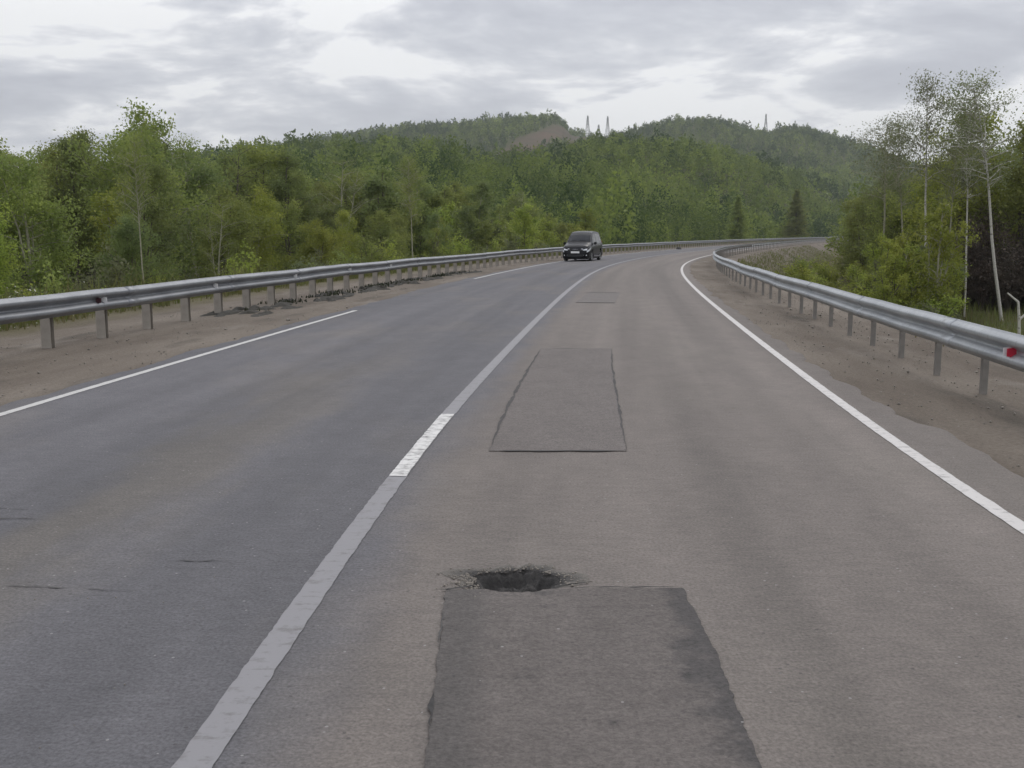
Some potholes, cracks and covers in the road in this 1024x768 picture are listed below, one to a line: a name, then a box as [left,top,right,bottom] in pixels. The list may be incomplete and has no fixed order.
pothole [440,564,593,592]
